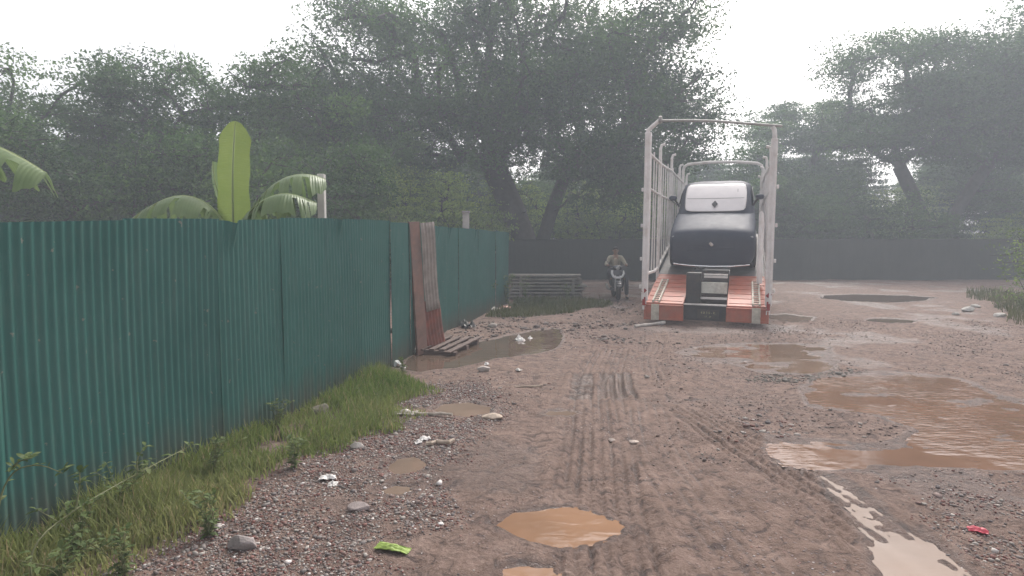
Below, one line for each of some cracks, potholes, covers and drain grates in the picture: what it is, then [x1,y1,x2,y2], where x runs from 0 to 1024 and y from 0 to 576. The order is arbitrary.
pothole [392,328,568,374]
pothole [807,471,996,576]
pothole [370,450,442,478]
pothole [754,370,1024,479]
pothole [478,500,645,560]
pothole [671,342,844,376]
pothole [363,477,431,501]
pothole [820,294,937,303]
pothole [422,398,501,420]
pothole [769,313,818,323]
